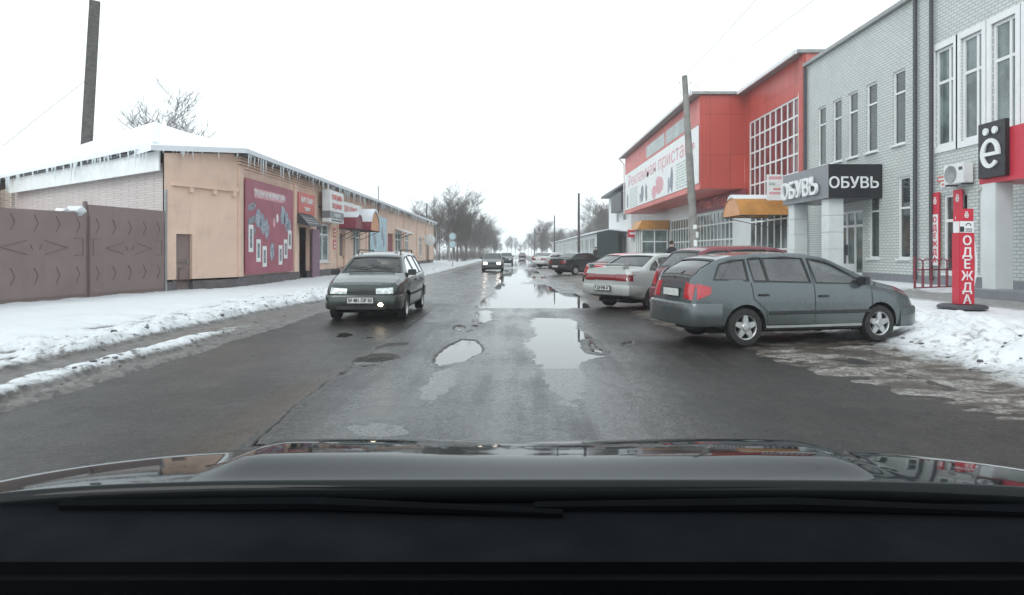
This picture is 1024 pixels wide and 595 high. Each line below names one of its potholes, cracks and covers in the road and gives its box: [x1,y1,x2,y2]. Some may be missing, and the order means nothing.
pothole [424,338,491,368]
pothole [579,338,611,356]
pothole [344,352,408,369]
